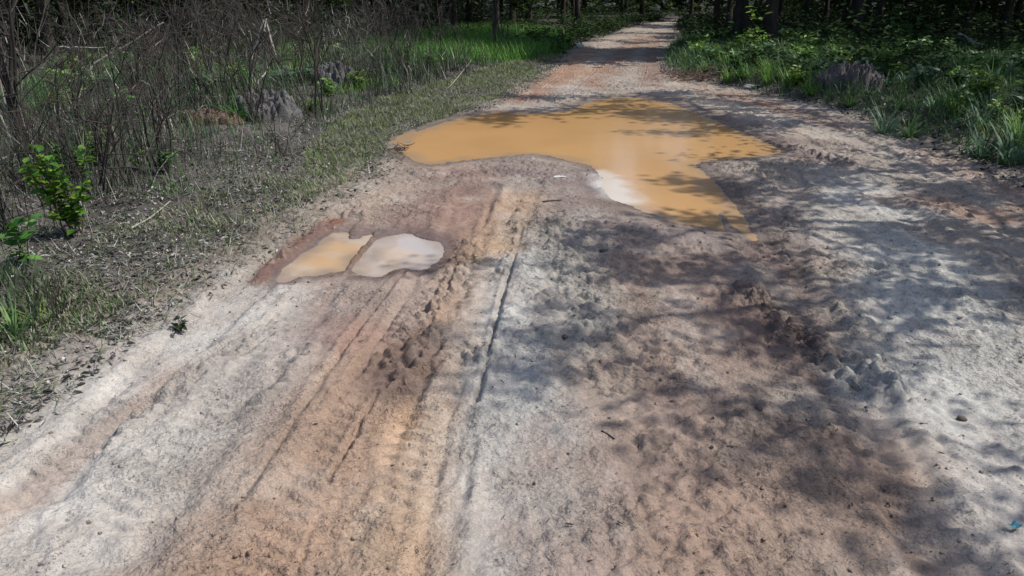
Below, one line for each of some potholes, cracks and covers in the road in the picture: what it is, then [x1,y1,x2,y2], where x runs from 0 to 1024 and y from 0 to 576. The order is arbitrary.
pothole [259,225,457,287]
pothole [386,94,796,249]
